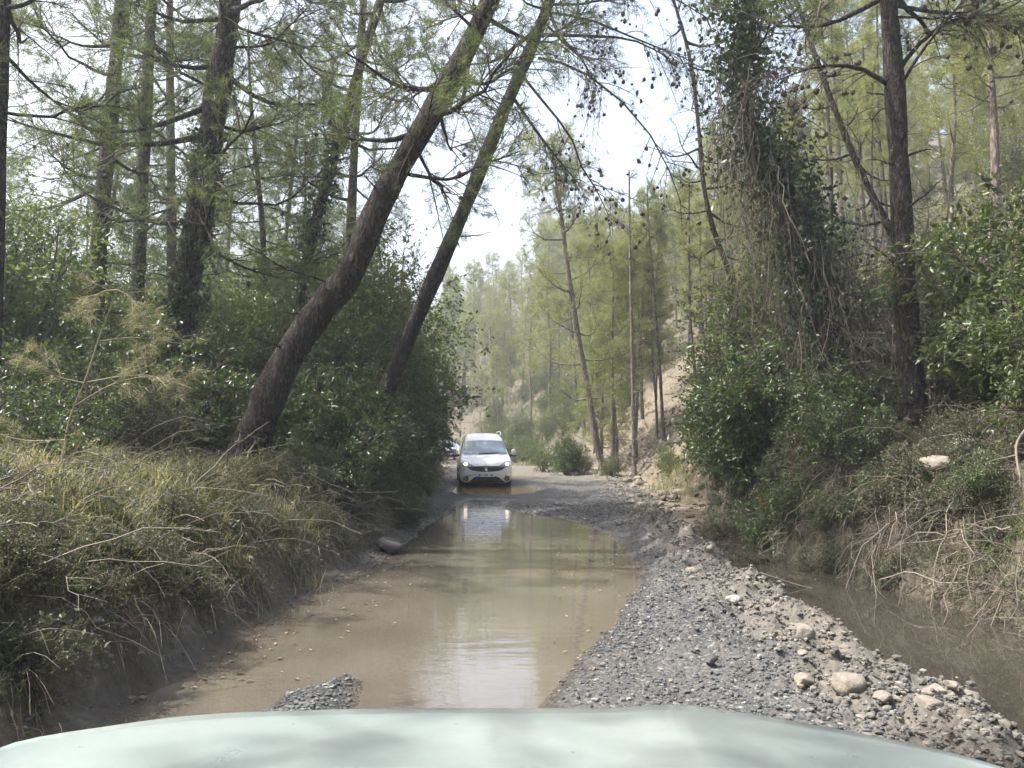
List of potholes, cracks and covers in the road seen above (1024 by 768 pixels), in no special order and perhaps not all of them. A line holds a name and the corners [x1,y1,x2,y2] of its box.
pothole [58,496,658,734]
